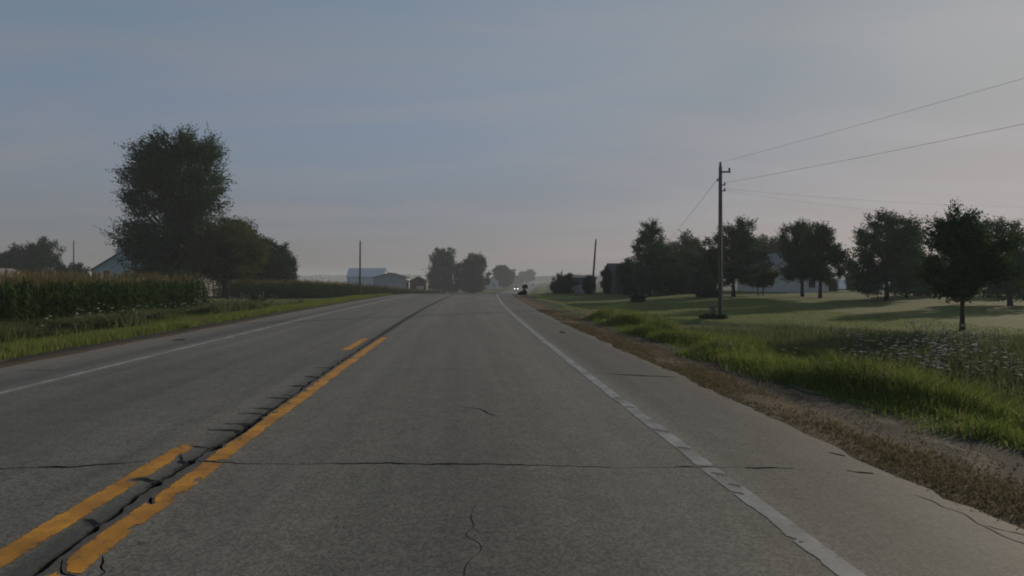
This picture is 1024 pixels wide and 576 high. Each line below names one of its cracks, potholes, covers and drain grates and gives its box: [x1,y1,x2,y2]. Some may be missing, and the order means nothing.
crack [5,368,669,377]
crack [916,495,1024,544]
crack [0,461,794,469]
crack [50,561,75,576]
crack [463,505,495,576]
